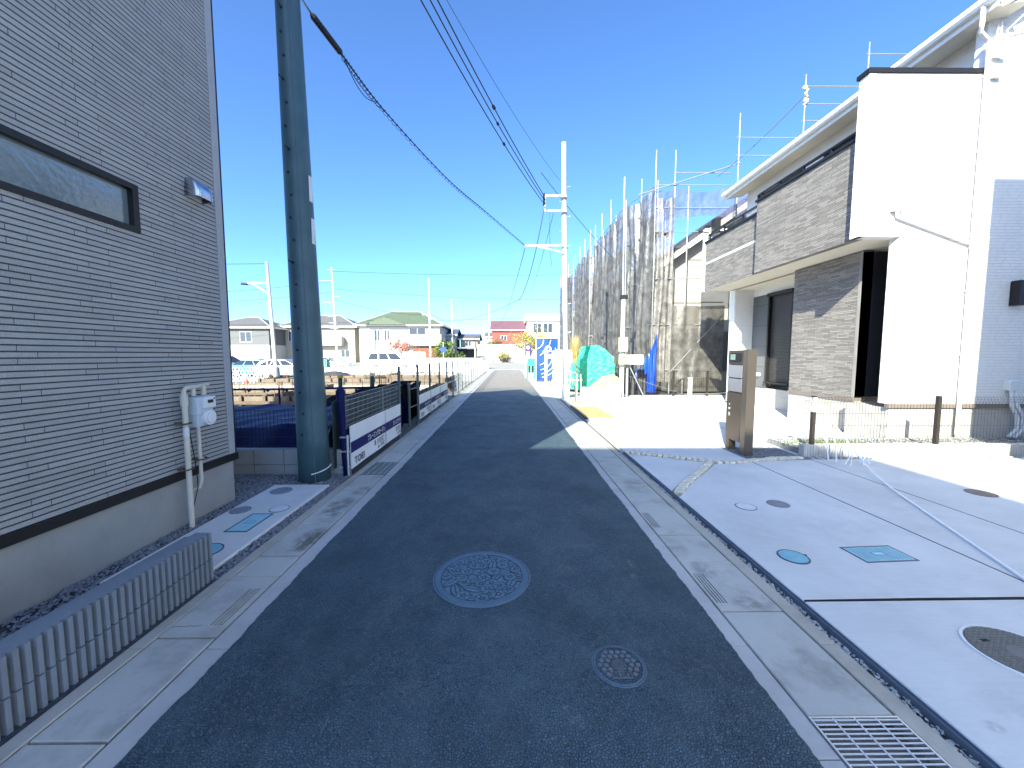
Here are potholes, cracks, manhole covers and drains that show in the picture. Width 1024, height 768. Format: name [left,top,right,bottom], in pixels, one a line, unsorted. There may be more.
utility cover [269,505,290,513]
utility cover [735,503,757,511]
drain grate [808,716,953,768]
utility cover [777,549,811,564]
utility cover [229,506,252,514]
utility cover [270,487,293,495]
manhole cover [432,551,531,608]
manhole cover [958,624,1024,676]
manhole cover [592,645,647,688]
utility cover [963,489,999,497]
utility cover [766,500,790,508]
